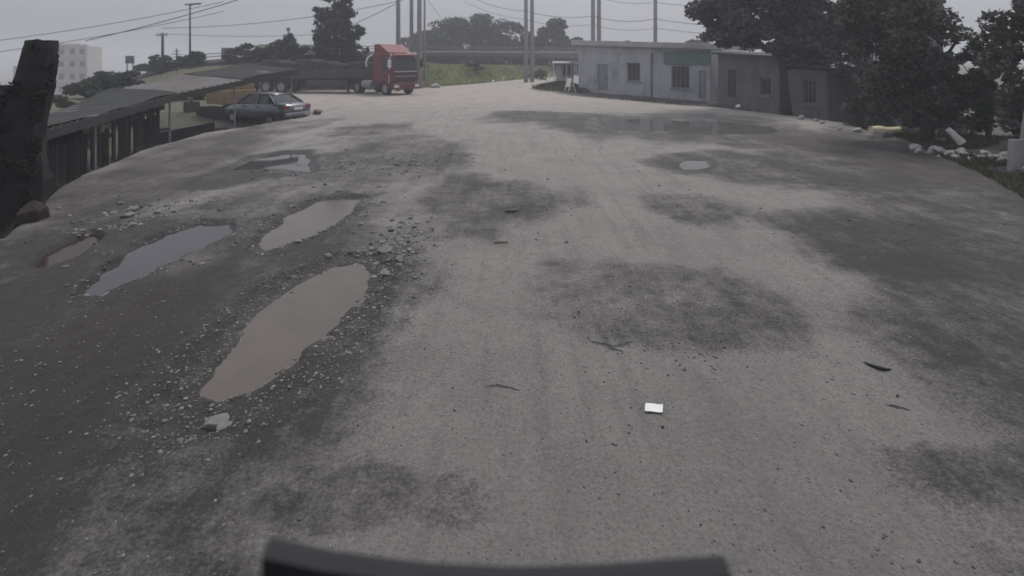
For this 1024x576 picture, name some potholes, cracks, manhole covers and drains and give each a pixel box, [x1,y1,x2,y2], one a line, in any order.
pothole [666,157,727,172]
pothole [14,225,116,271]
pothole [52,216,246,303]
pothole [168,149,326,192]
pothole [106,247,411,469]
pothole [236,191,379,254]
pothole [580,116,801,137]
